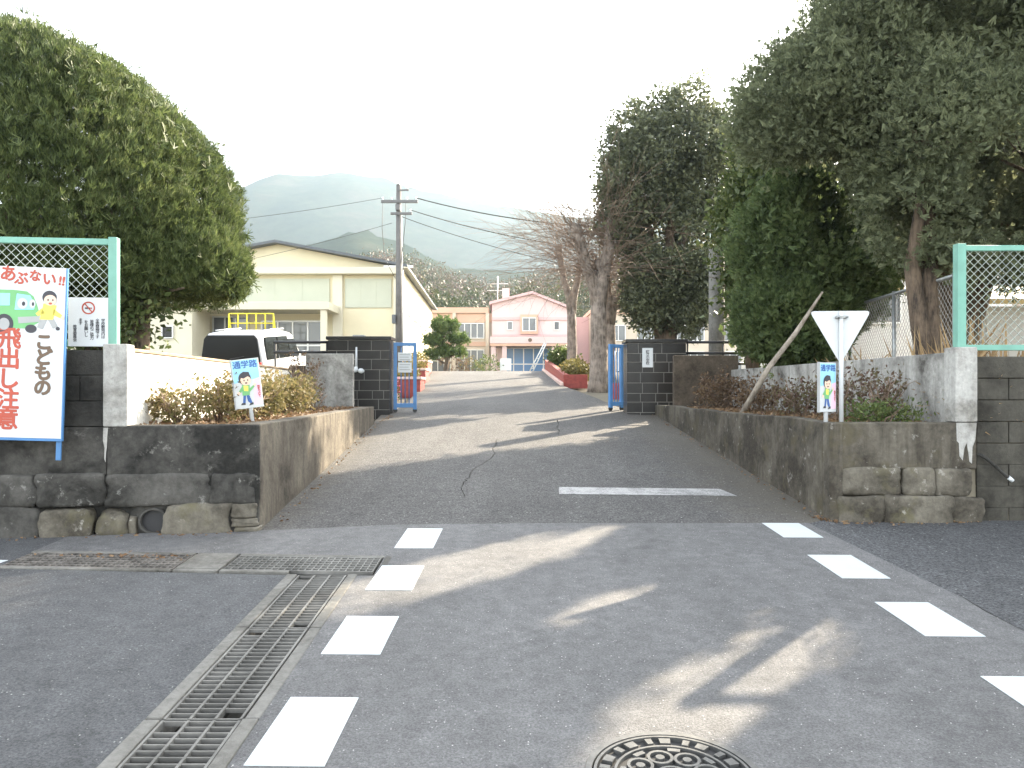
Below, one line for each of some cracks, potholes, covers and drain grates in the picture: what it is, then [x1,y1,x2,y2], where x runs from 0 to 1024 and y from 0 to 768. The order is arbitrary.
drain grate [249,575,347,630]
drain grate [163,628,308,721]
drain grate [1,552,194,569]
drain grate [117,720,241,768]
drain grate [224,555,382,576]
manhole cover [585,732,758,768]
